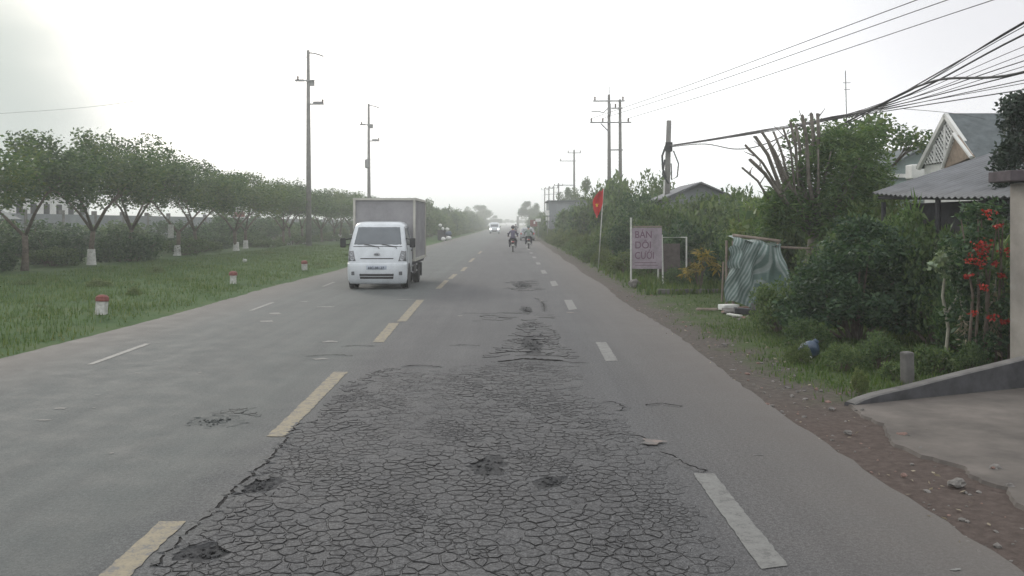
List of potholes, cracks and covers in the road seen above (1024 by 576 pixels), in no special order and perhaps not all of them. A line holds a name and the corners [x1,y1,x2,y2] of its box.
pothole [172,540,238,566]
crack [150,280,735,576]
pothole [530,475,573,491]
pothole [465,455,509,478]
pothole [231,473,288,496]
pothole [185,414,250,429]
